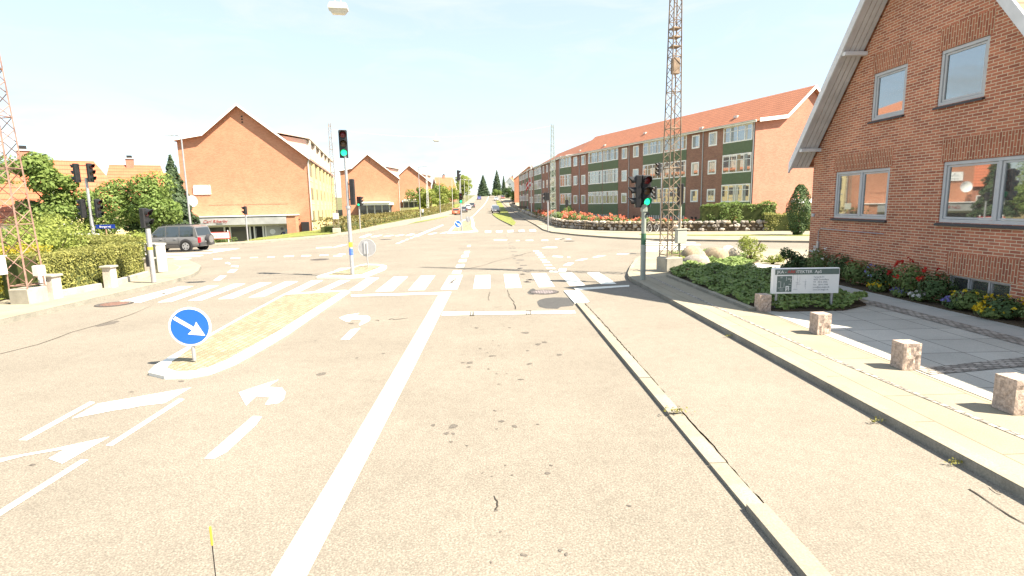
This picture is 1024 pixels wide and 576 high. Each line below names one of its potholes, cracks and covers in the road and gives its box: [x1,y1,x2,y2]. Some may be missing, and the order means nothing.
crack [969,486,1023,523]
